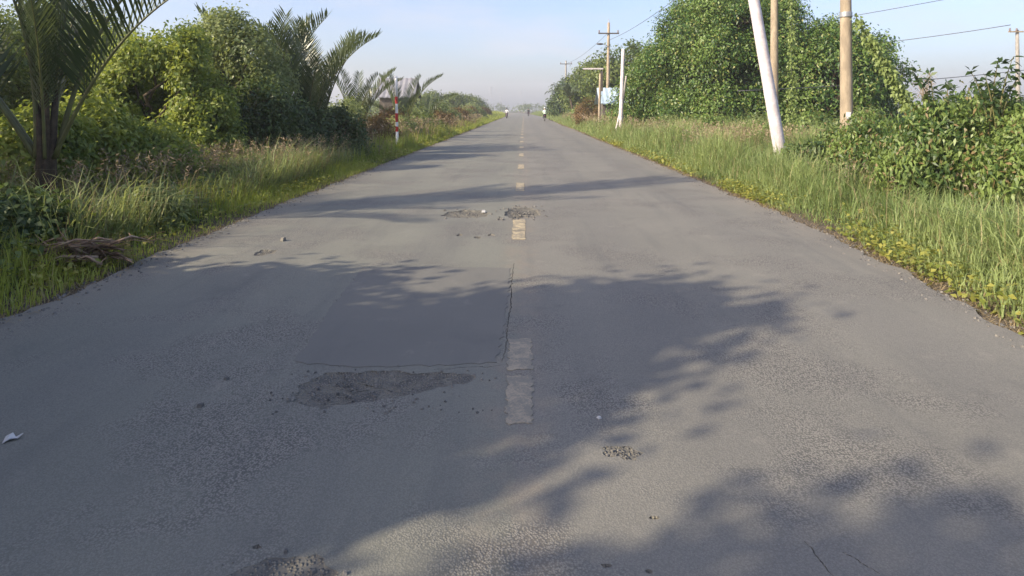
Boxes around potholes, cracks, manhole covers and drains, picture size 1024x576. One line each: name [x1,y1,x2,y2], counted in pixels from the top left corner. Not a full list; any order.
crack [804,541,880,576]
crack [434,265,514,370]
pothole [497,205,548,220]
pothole [259,365,497,415]
pothole [222,548,348,576]
pothole [441,209,497,219]
pothole [602,446,644,461]
